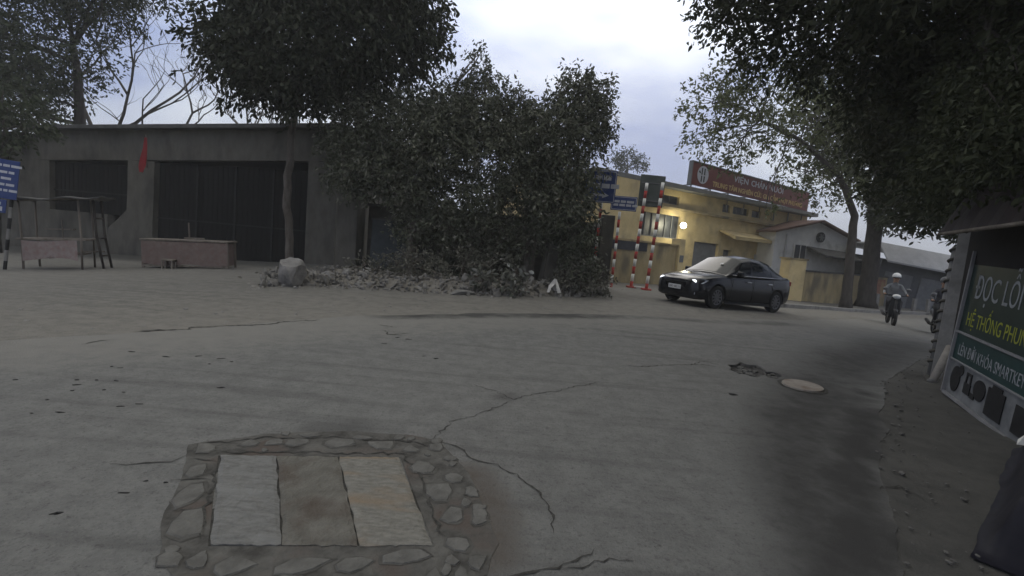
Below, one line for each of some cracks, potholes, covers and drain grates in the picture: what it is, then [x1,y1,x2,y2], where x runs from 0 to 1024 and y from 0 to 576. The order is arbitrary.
manhole cover [777,379,828,394]
crack [109,383,617,576]
crack [143,320,316,331]
pothole [730,362,765,377]
